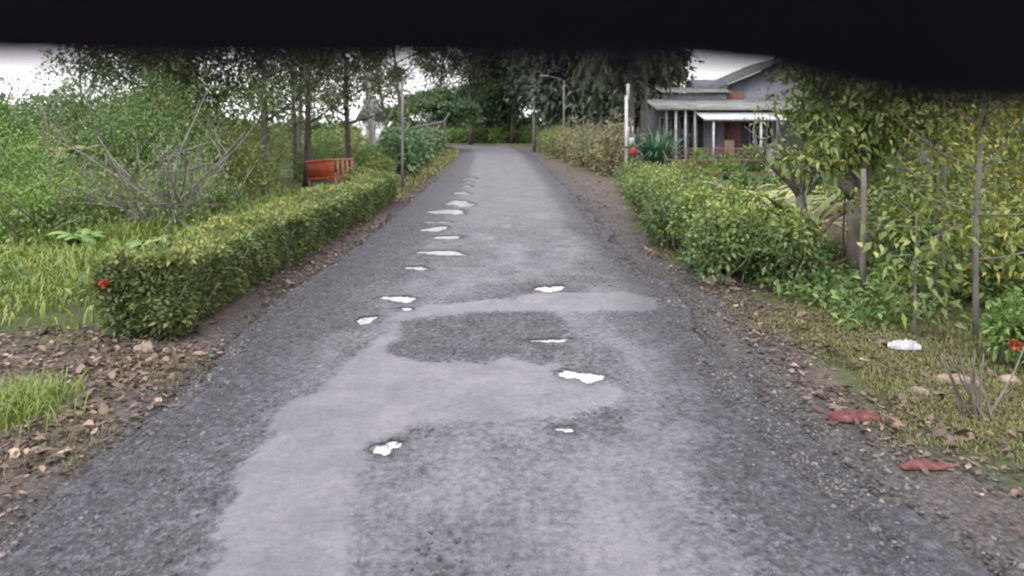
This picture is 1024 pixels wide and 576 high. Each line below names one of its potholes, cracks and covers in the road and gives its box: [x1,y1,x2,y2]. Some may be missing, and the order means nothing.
pothole [526,283,571,294]
pothole [517,335,584,345]
pothole [547,366,618,389]
pothole [394,264,437,272]
pothole [408,249,476,257]
pothole [372,294,425,304]
pothole [347,314,385,327]
pothole [414,224,454,233]
pothole [356,433,415,463]
pothole [438,199,481,208]
pothole [542,421,587,439]
